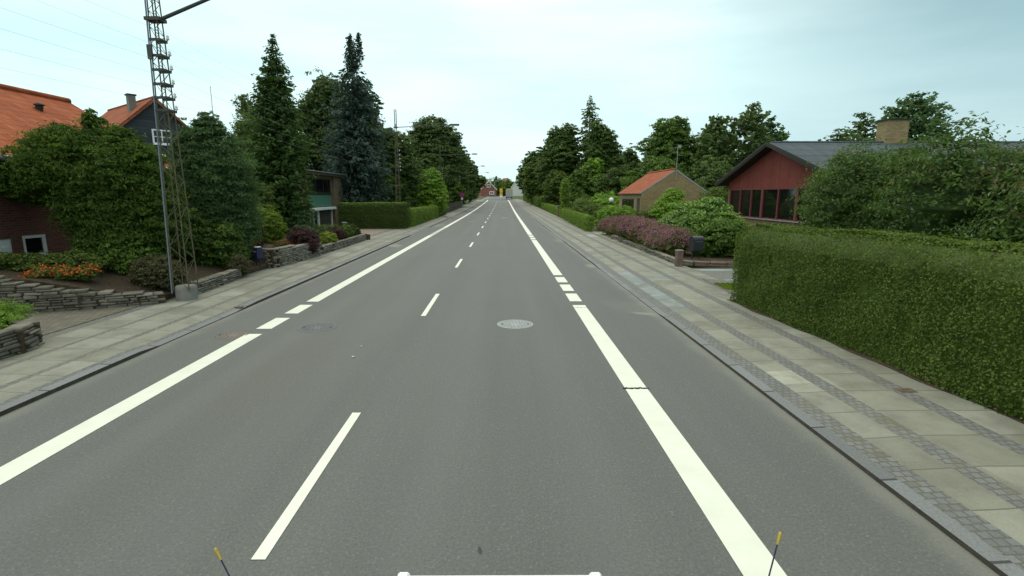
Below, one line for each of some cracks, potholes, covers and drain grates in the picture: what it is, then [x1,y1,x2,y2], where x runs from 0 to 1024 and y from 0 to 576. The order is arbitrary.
manhole cover [297,323,337,332]
manhole cover [211,330,255,340]
manhole cover [497,320,533,329]
